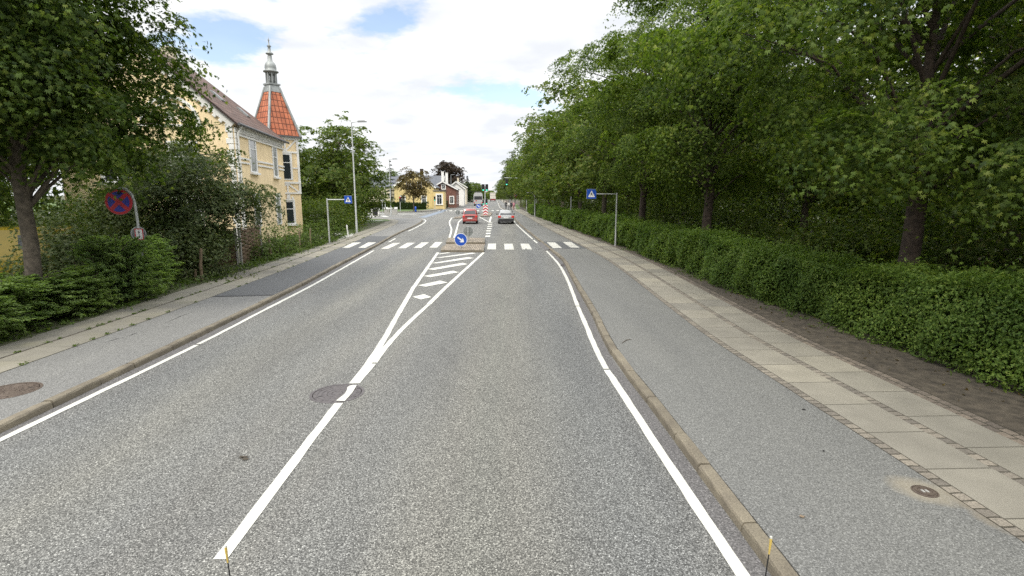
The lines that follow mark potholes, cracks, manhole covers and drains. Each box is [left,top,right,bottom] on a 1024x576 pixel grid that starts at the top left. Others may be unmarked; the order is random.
manhole cover [911,485,939,498]
manhole cover [0,382,43,399]
manhole cover [309,384,365,403]
